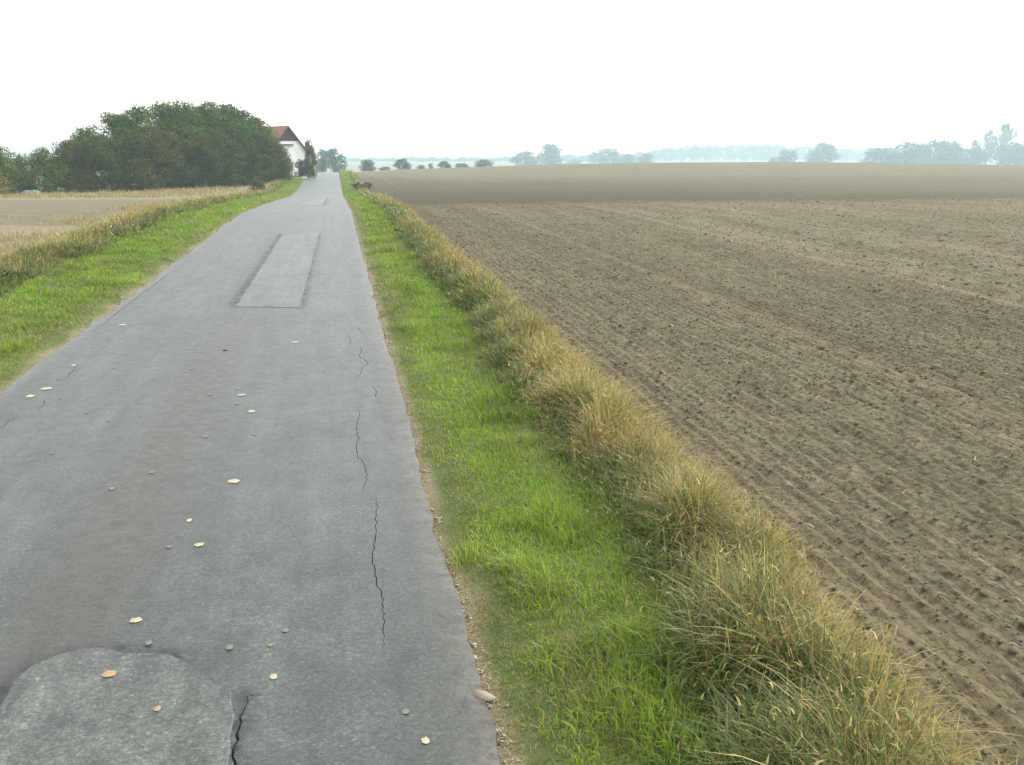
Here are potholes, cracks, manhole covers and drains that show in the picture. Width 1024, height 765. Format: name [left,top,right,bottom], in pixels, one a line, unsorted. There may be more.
crack [348,327,385,648]
crack [231,694,258,765]
